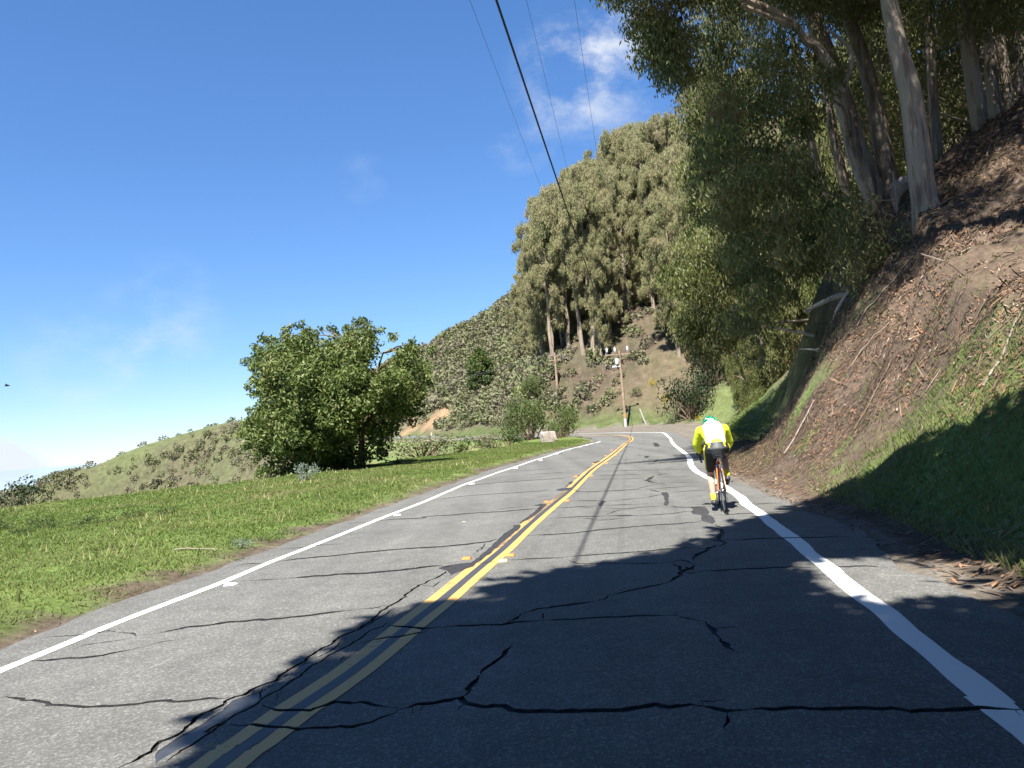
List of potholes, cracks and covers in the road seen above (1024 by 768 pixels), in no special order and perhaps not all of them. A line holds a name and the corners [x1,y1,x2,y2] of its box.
crack [2,443,1024,768]
